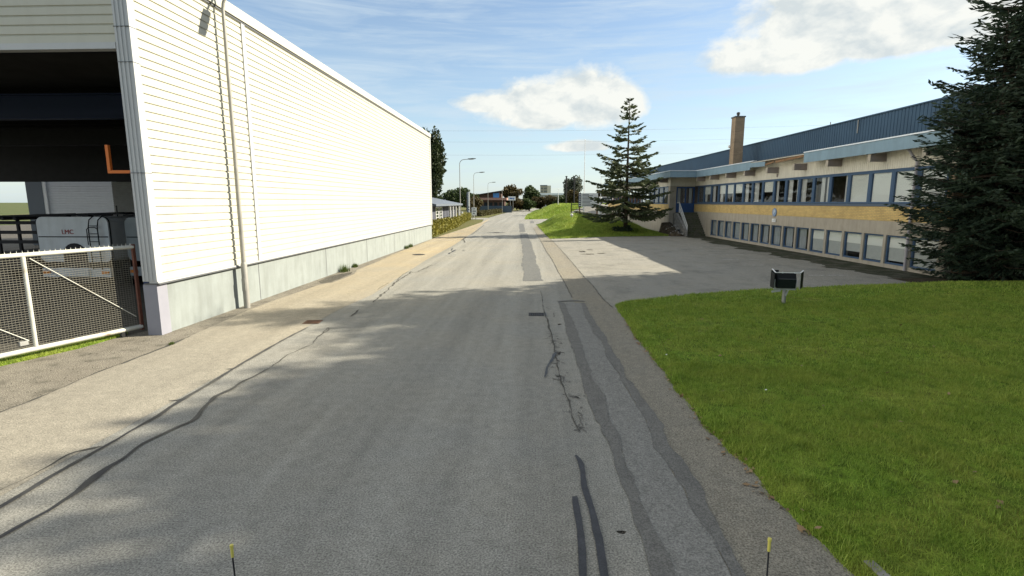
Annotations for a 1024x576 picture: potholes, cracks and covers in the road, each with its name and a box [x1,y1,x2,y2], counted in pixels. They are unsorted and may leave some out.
crack [541,293,586,432]
